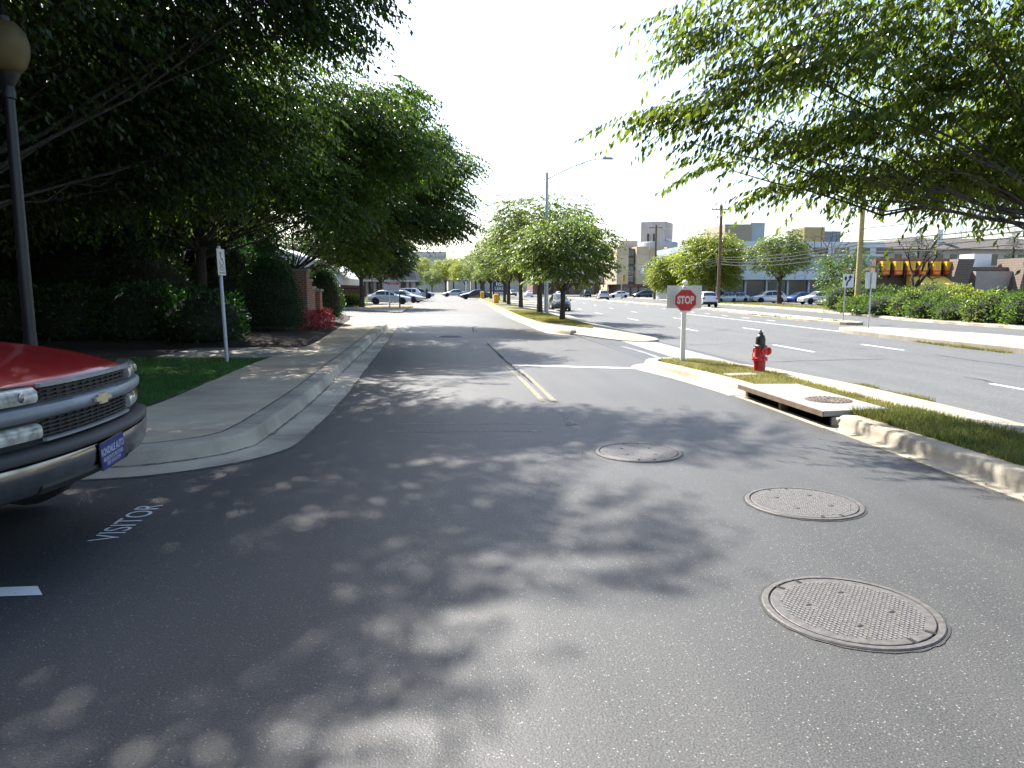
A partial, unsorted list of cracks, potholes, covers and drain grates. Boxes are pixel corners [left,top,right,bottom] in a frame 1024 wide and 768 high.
manhole cover [743,487,868,521]
manhole cover [758,576,951,653]
drain grate [735,384,889,428]
manhole cover [594,443,684,463]
